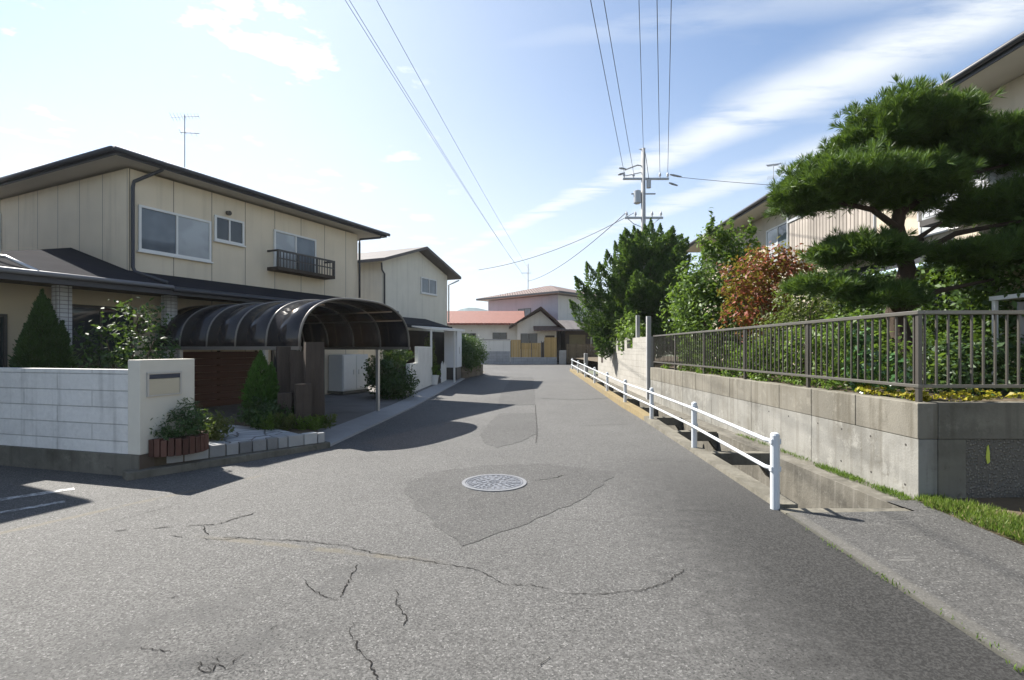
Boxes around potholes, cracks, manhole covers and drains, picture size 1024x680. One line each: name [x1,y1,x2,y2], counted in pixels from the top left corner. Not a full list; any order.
crack [195,653,245,674]
crack [349,621,378,679]
manhole cover [462,474,527,492]
crack [115,506,684,600]
